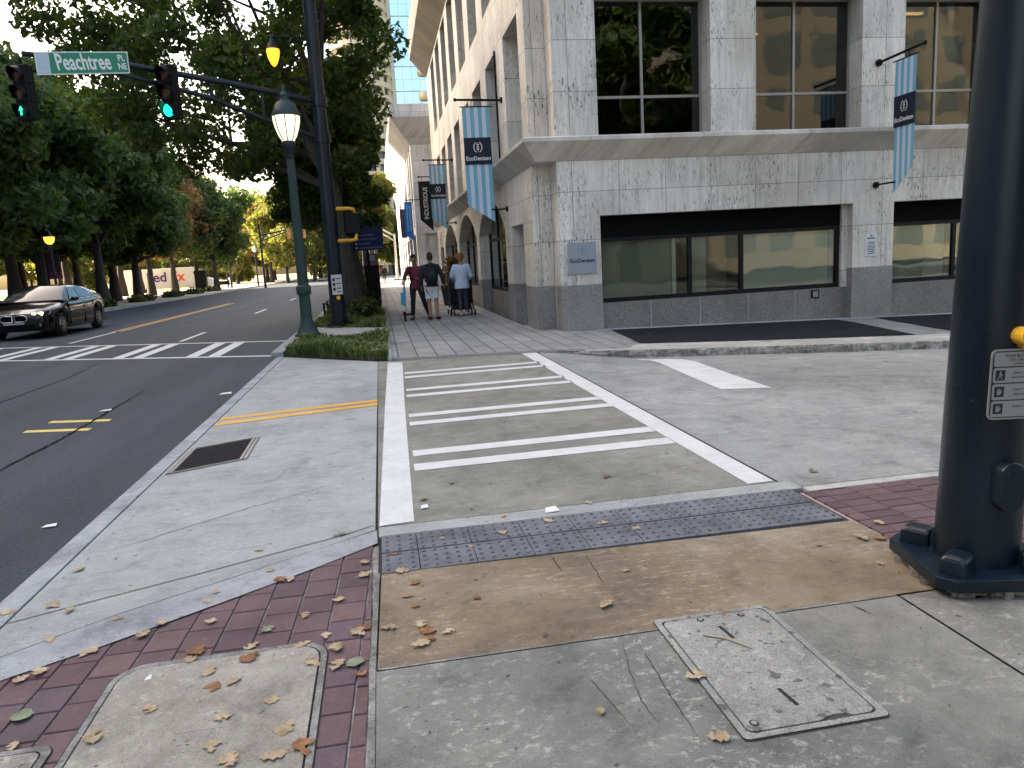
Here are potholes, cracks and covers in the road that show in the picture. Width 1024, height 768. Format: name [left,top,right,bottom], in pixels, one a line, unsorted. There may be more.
crack [590,641,696,733]
drain grate [165,436,260,475]
manhole cover [653,605,890,741]
crack [1,390,145,470]
manhole cover [53,642,329,768]
